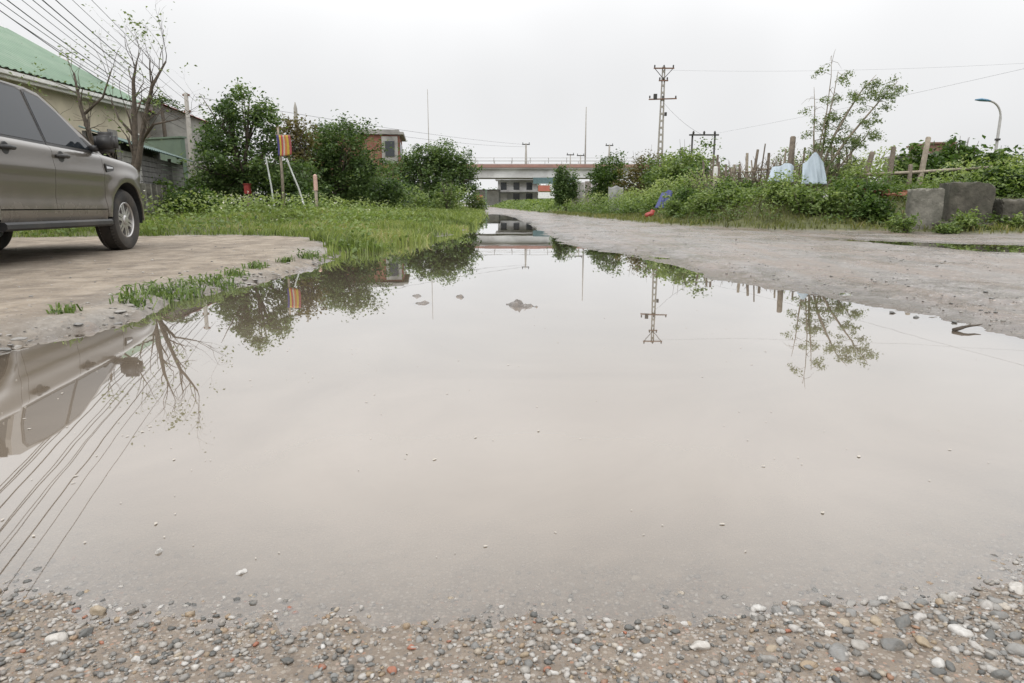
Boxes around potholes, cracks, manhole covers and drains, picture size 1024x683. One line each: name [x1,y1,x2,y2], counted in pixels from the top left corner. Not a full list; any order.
pothole [0,214,1024,668]
